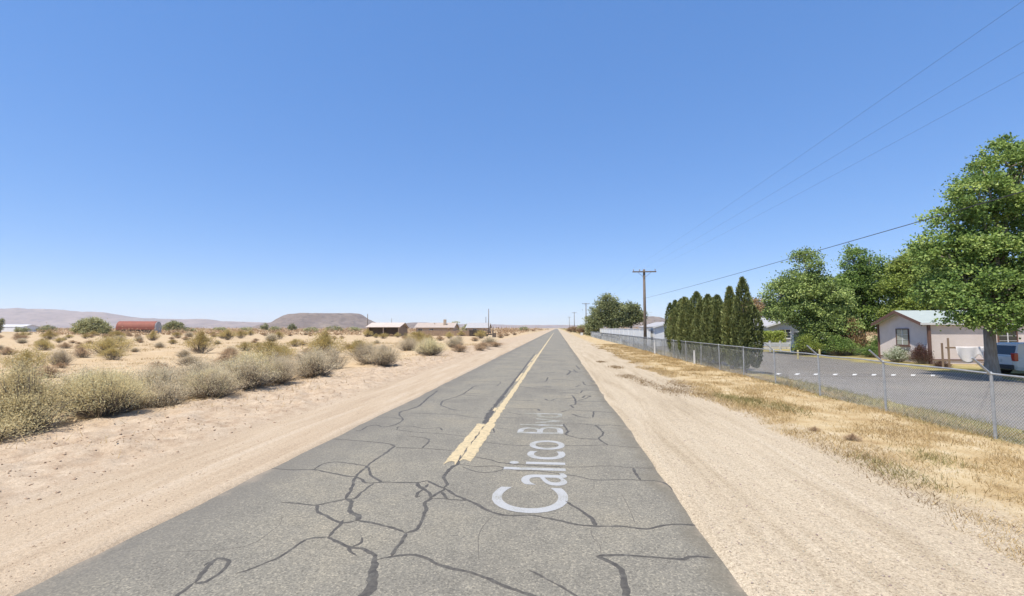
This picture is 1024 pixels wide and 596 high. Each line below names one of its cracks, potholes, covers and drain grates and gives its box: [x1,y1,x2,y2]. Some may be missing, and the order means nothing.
crack [566,466,673,522]
crack [356,361,640,448]
